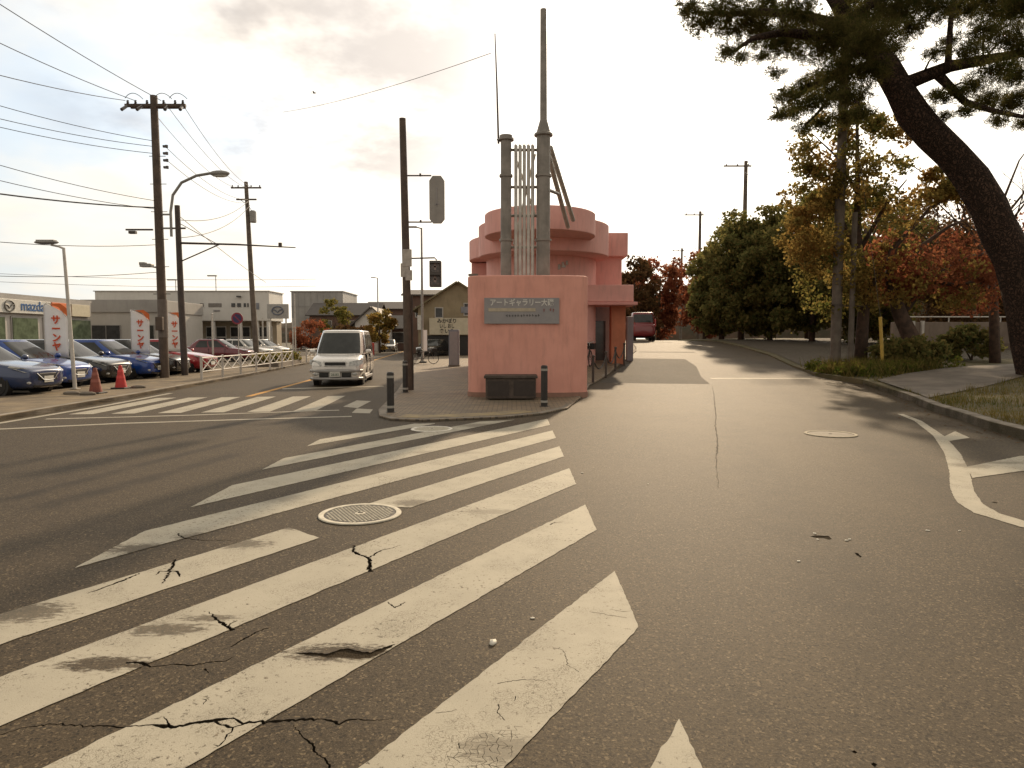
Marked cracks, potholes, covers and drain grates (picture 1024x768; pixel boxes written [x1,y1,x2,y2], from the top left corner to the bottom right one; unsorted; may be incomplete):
crack [134,612,271,673]
manhole cover [318,503,401,525]
crack [352,545,380,572]
manhole cover [804,430,858,438]
crack [1,718,376,768]
crack [157,559,180,581]
pothole [304,645,393,659]
